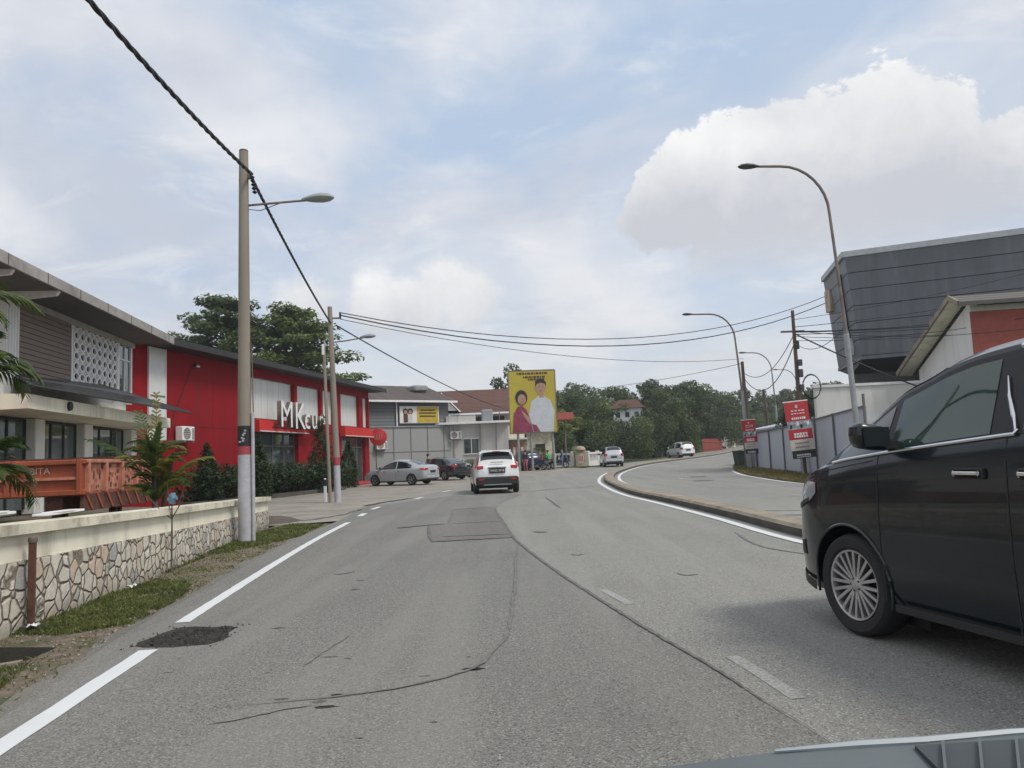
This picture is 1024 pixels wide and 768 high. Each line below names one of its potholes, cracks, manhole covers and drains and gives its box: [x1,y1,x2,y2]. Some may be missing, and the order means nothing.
crack [183,507,547,724]
crack [735,532,804,554]
